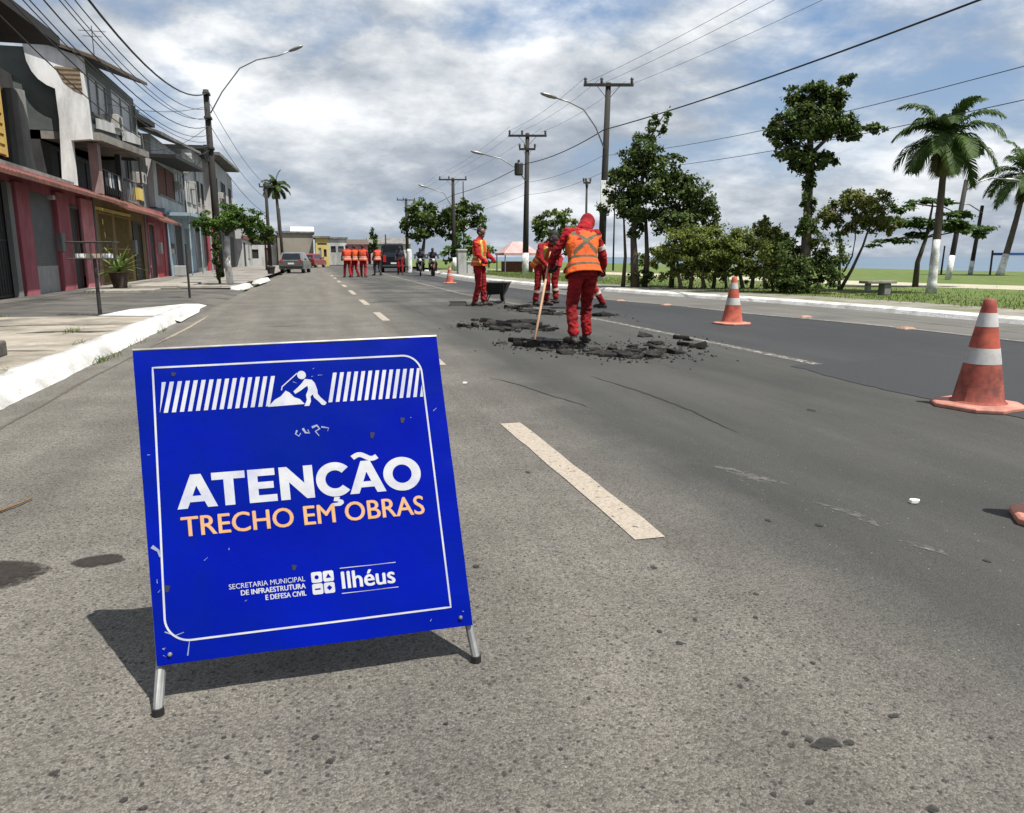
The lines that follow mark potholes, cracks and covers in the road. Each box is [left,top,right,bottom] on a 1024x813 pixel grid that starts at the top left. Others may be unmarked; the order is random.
crack [596,377,736,432]
pothole [540,340,587,350]
